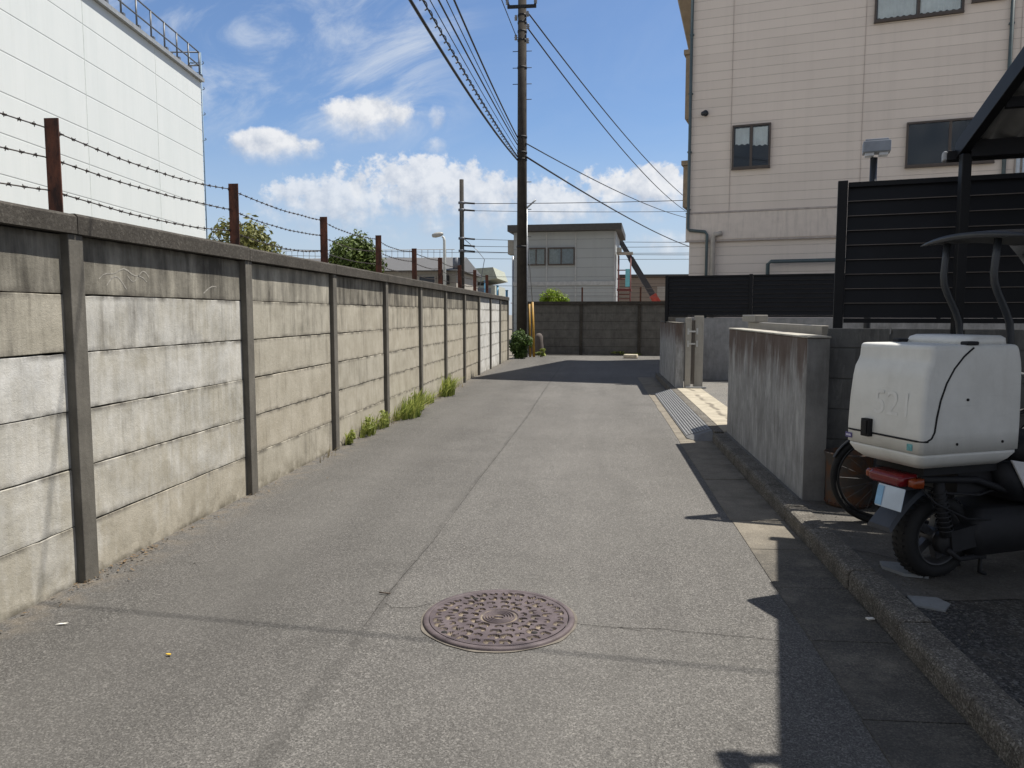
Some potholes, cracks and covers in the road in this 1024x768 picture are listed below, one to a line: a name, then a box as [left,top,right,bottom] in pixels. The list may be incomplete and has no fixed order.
manhole cover [421,589,578,653]
